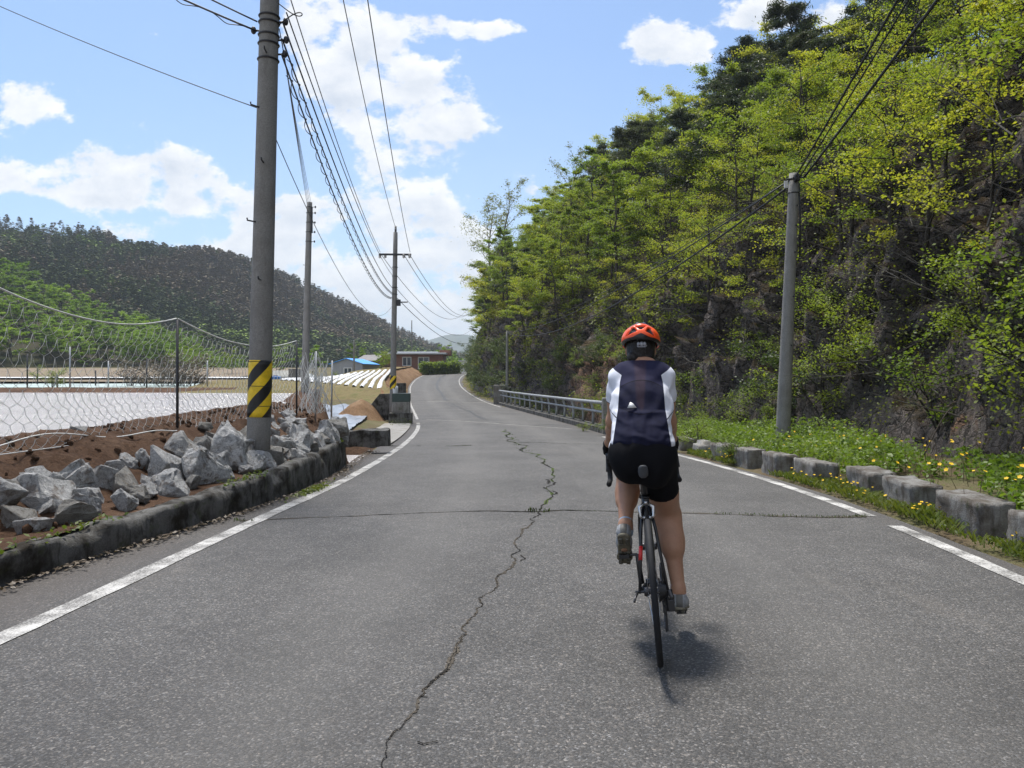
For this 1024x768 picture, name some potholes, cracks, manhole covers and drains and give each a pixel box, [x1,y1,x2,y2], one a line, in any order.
crack [234,429,868,768]
